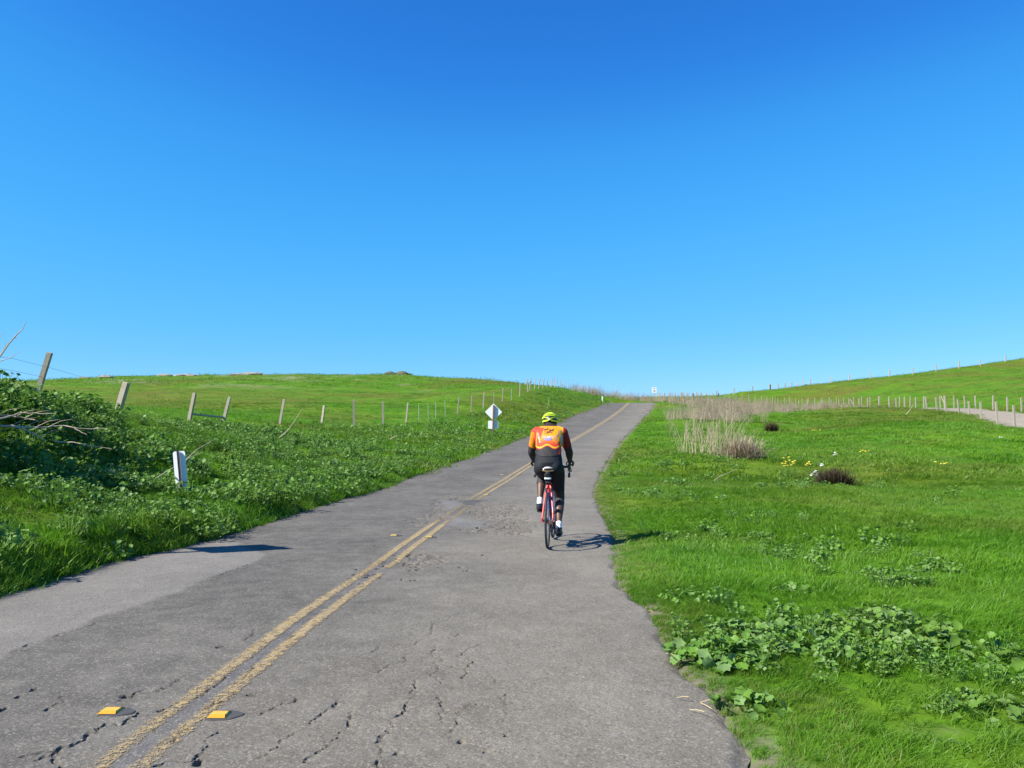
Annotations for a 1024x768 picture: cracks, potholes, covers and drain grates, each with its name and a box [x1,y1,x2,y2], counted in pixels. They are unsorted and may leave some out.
crack [18,616,519,768]
